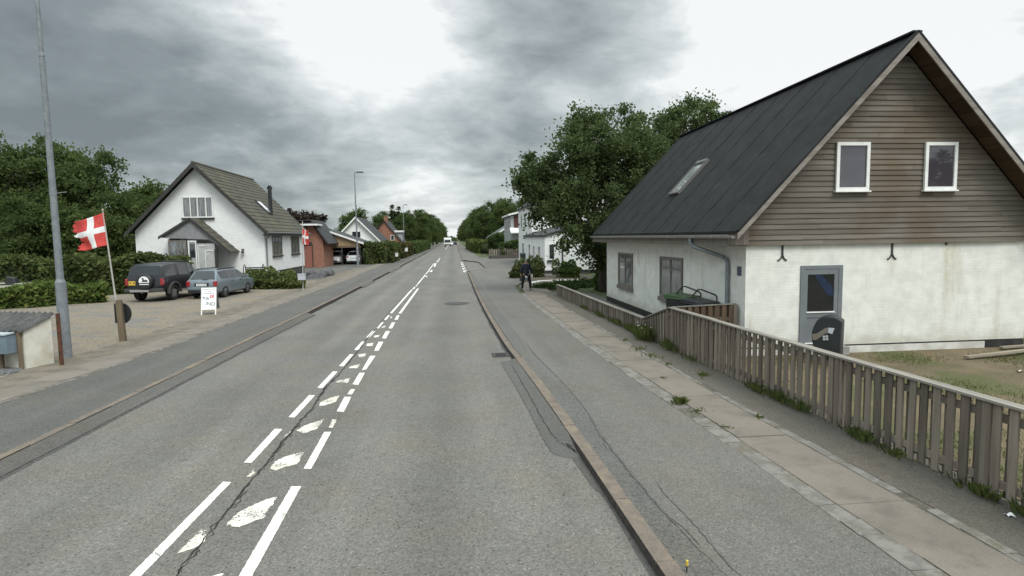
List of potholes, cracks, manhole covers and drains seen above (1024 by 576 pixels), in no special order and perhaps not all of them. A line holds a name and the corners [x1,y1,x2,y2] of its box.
crack [512,342,742,576]
crack [177,294,407,576]
